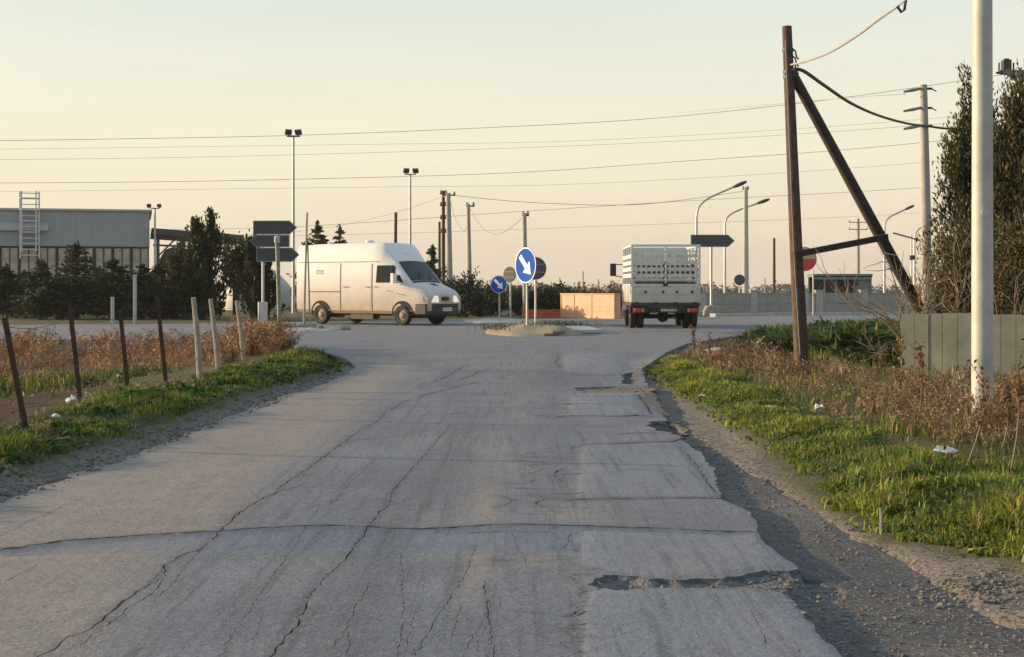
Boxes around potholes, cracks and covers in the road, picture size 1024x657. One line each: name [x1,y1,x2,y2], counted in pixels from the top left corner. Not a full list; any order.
crack [0,383,837,657]
pothole [621,372,639,385]
pothole [645,421,690,440]
